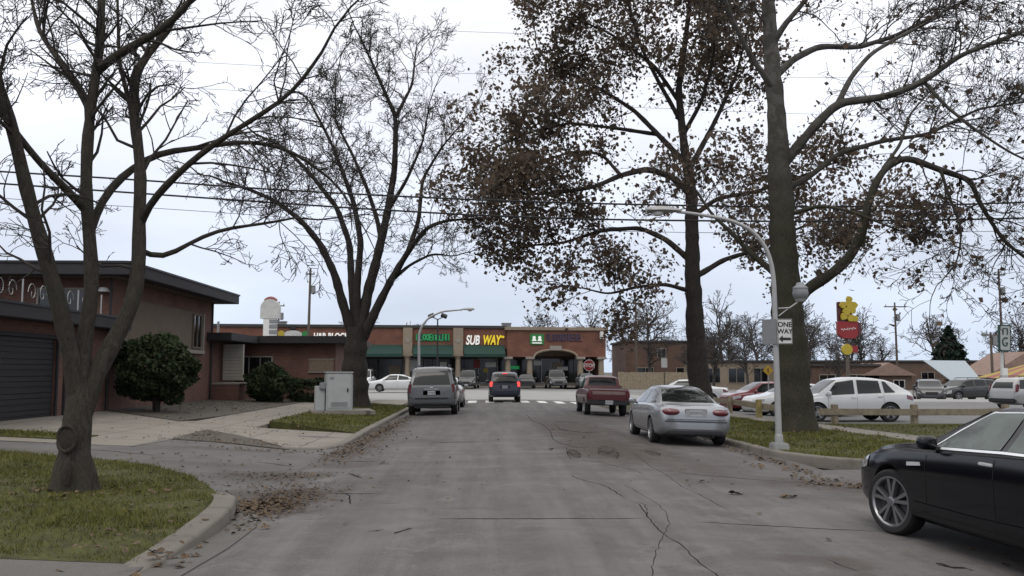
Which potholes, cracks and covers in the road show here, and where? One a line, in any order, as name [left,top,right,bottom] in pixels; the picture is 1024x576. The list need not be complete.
crack [303,414,878,576]
pothole [597,445,621,458]
